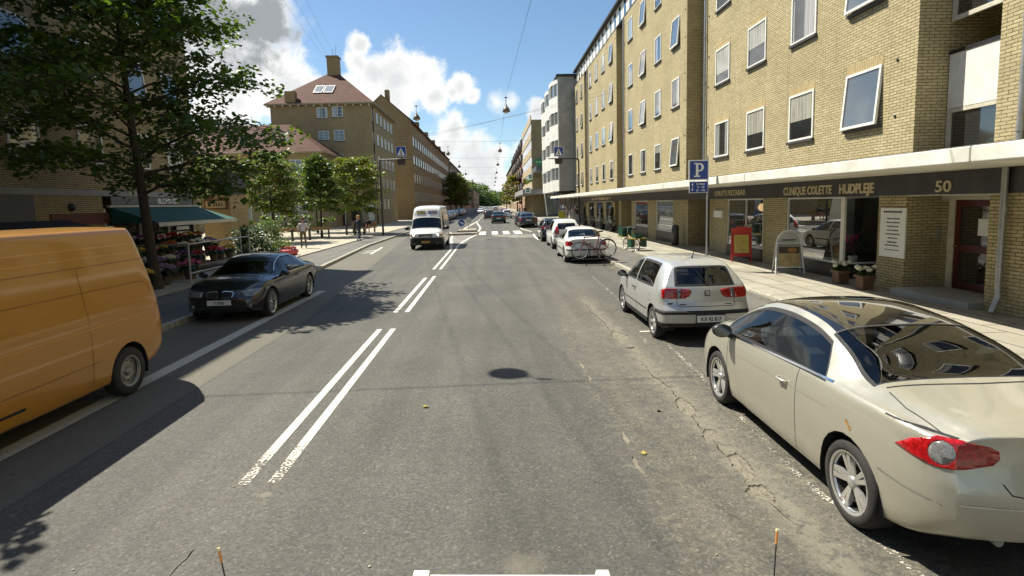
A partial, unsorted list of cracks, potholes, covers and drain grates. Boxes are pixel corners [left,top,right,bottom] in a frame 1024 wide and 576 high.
crack [646,367,727,457]
